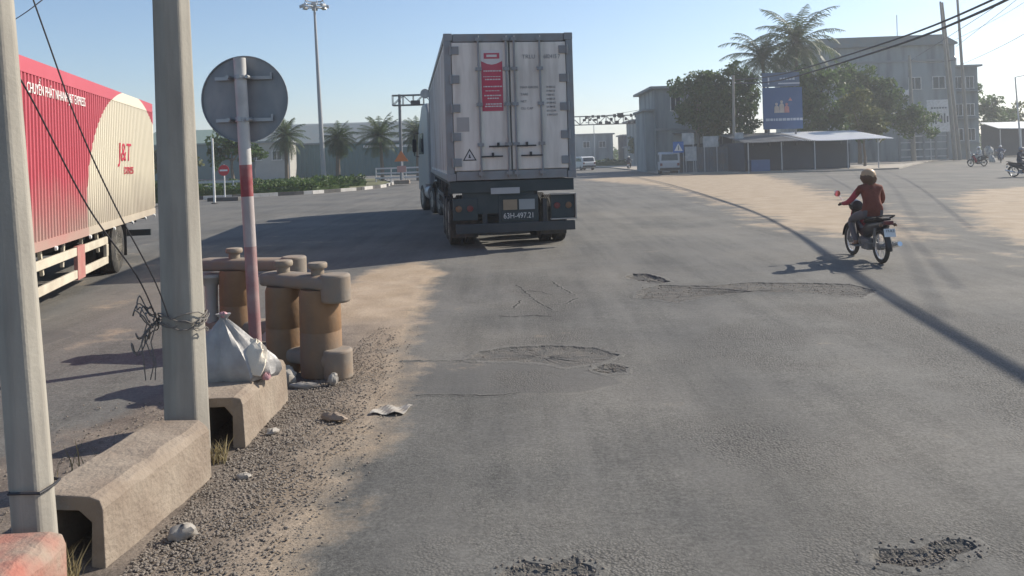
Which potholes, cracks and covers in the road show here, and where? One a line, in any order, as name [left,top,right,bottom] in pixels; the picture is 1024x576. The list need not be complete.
crack [498,281,580,318]
pothole [486,550,610,576]
pothole [584,362,637,376]
pothole [854,533,993,575]
pothole [620,273,675,284]
pothole [461,344,626,370]
